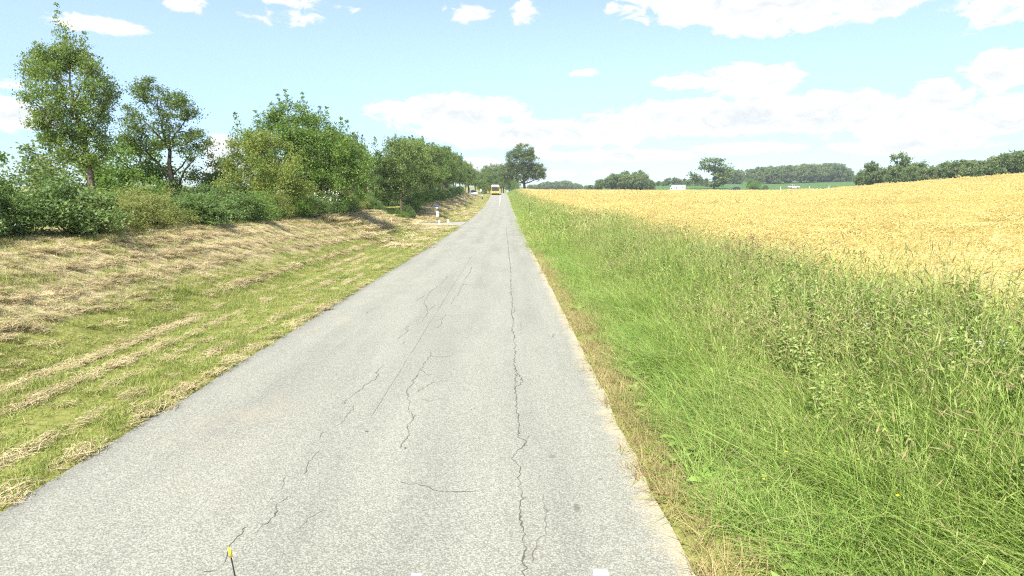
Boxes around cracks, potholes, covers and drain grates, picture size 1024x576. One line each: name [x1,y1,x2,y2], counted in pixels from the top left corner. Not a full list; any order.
crack [506,231,548,576]
crack [400,352,450,448]
crack [197,479,287,576]
crack [305,365,384,472]
